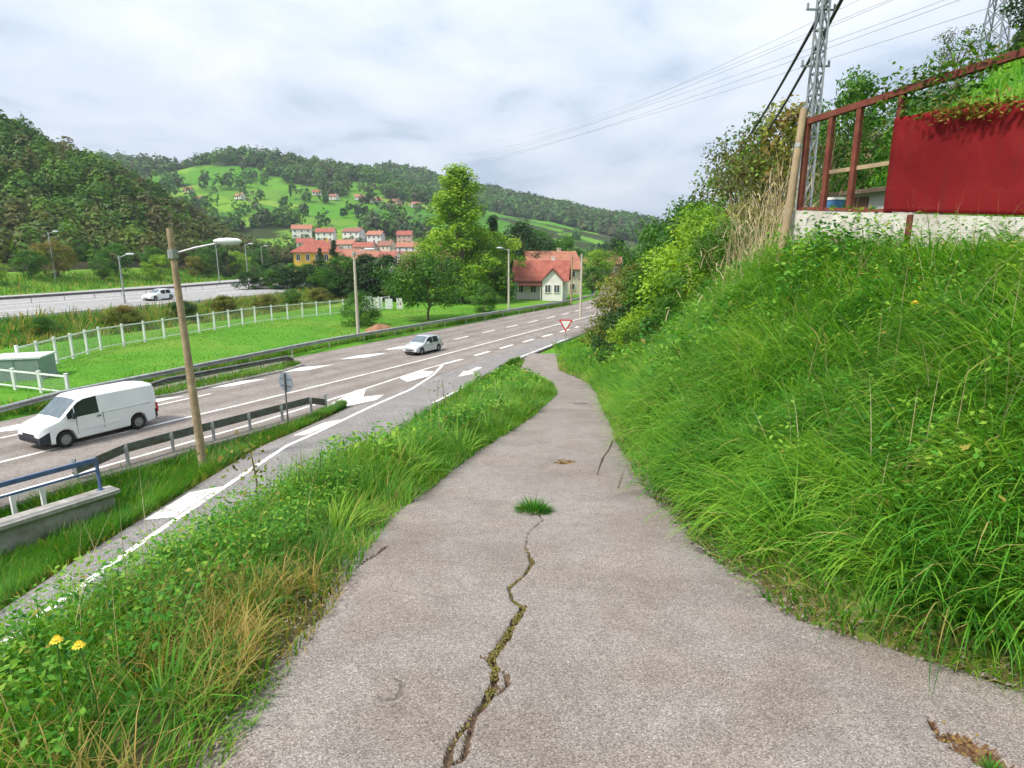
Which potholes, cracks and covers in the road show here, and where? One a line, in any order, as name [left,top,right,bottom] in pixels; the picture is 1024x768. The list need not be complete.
crack [389,514,544,768]
crack [597,440,625,489]
crack [356,545,389,569]
